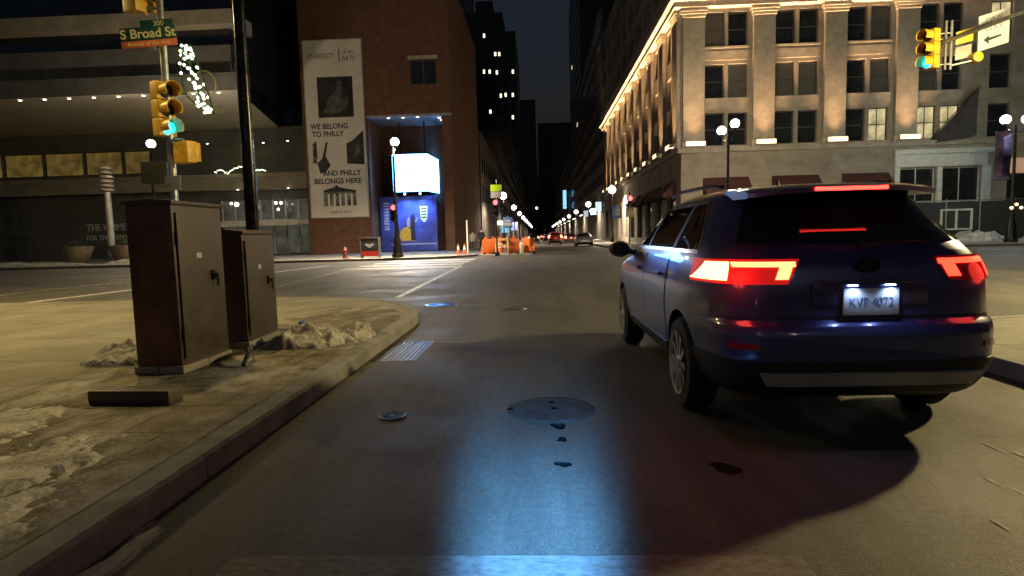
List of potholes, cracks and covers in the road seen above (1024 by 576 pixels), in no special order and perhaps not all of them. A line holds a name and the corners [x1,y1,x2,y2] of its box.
pothole [708,462,743,475]
manhole cover [378,411,407,420]
drain grate [371,341,434,362]
manhole cover [507,397,595,423]
